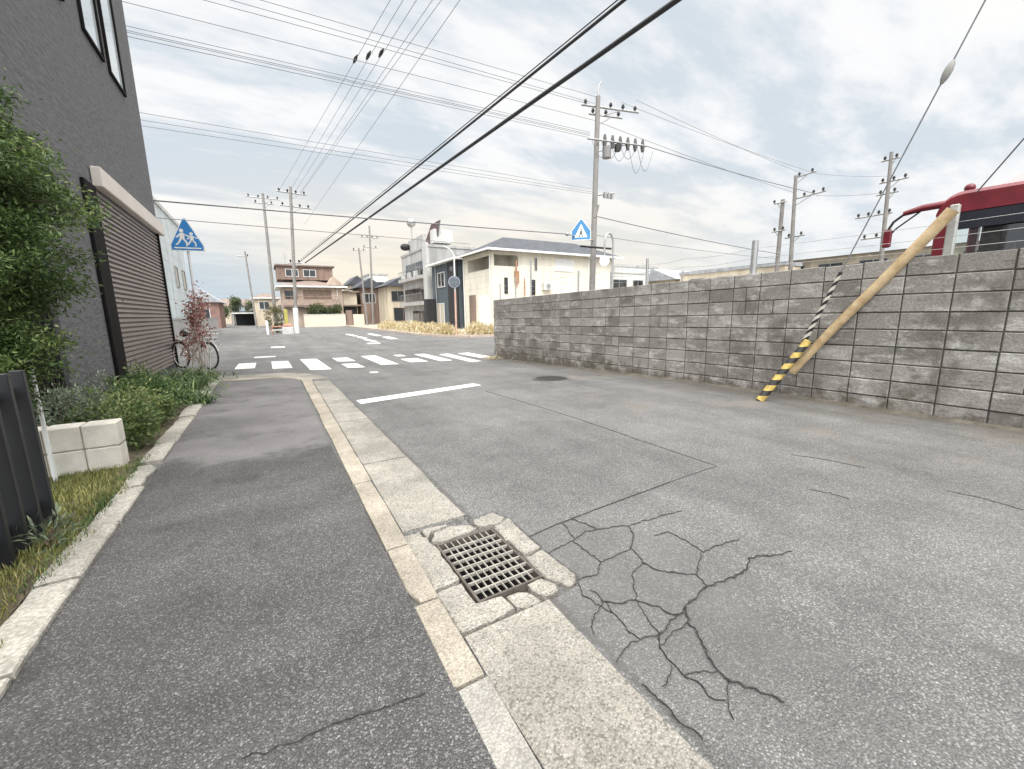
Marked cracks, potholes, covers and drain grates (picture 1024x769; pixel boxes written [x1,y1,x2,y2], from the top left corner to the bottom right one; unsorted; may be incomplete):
crack [946,490,1023,510]
crack [547,511,792,740]
drain grate [436,528,543,603]
crack [241,693,425,760]
